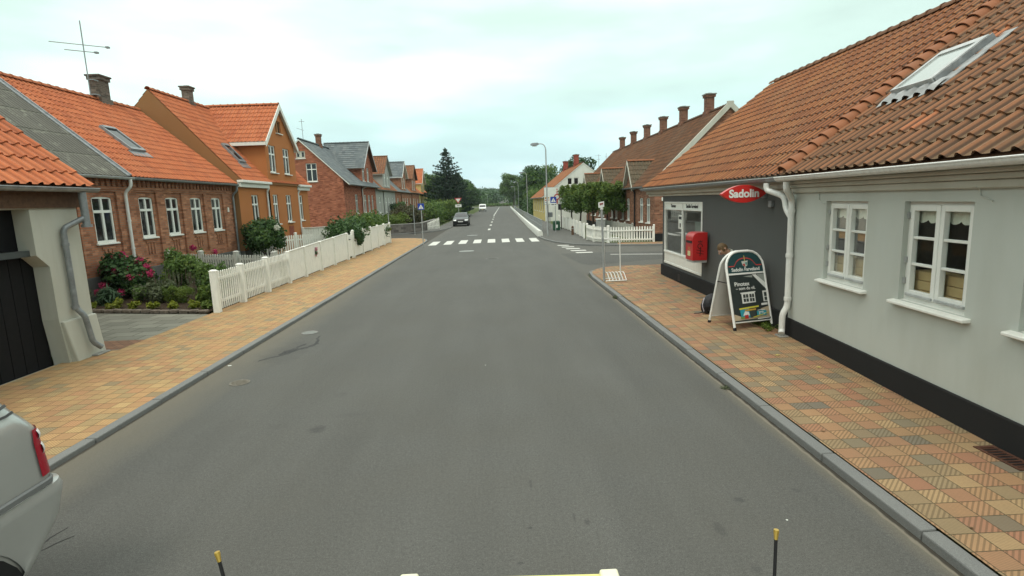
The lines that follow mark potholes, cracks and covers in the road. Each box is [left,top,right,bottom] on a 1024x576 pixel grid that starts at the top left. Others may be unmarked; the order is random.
drain grate [973,445,1024,471]
